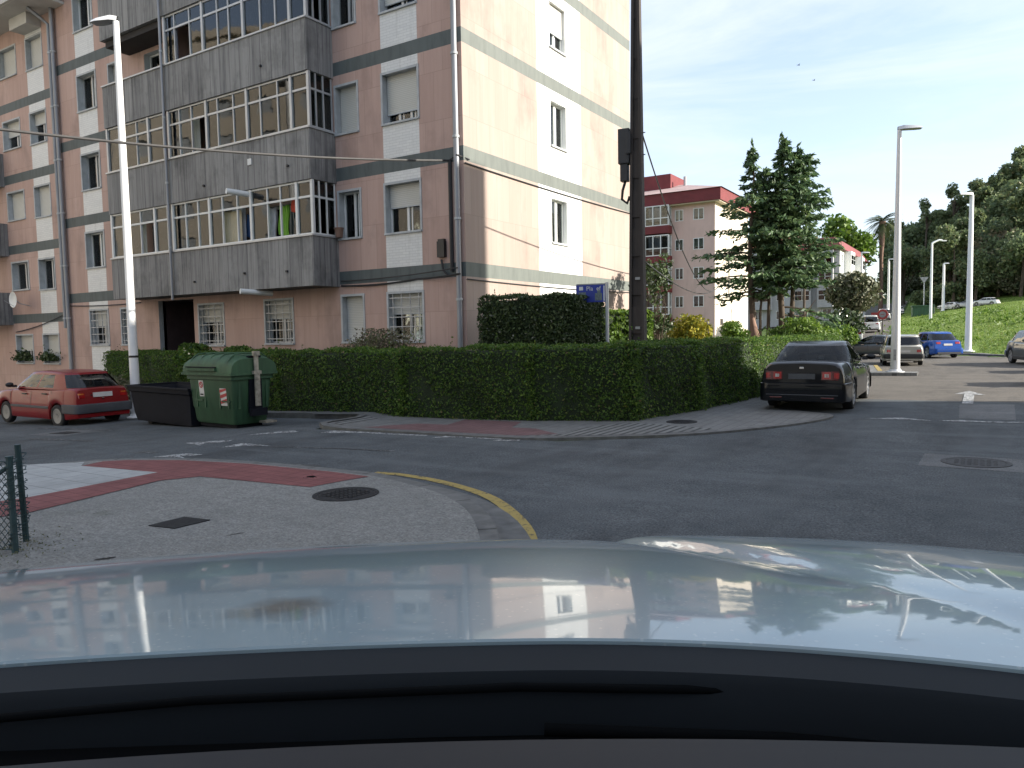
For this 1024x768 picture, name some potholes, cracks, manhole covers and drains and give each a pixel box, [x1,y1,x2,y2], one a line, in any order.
manhole cover [148,517,210,529]
manhole cover [940,457,1013,468]
manhole cover [312,487,379,502]
